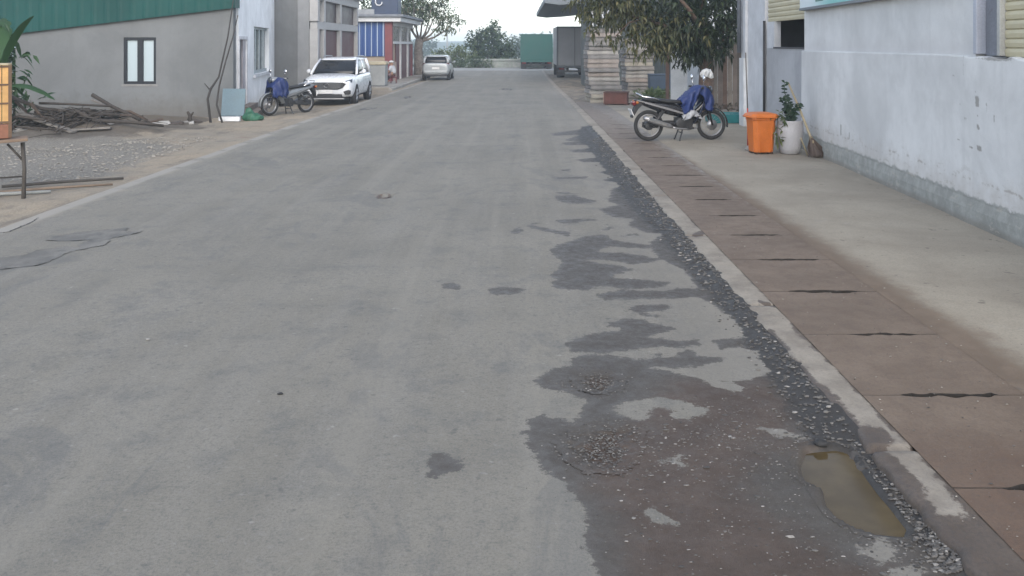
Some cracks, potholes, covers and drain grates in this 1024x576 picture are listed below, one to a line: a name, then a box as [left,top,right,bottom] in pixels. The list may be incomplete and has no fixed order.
pothole [785,440,920,545]
pothole [549,419,650,477]
pothole [569,369,630,395]
